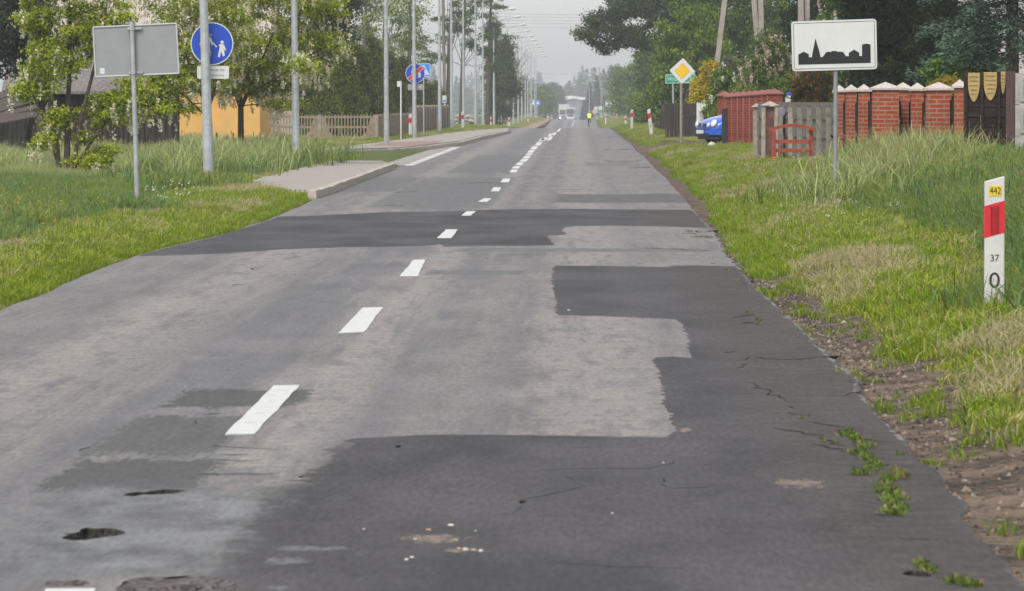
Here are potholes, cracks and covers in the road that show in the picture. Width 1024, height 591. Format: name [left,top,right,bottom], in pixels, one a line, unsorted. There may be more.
crack [727,311,767,324]
pothole [62,527,125,540]
crack [499,457,705,514]
pothole [116,575,242,591]
crack [720,351,918,516]
